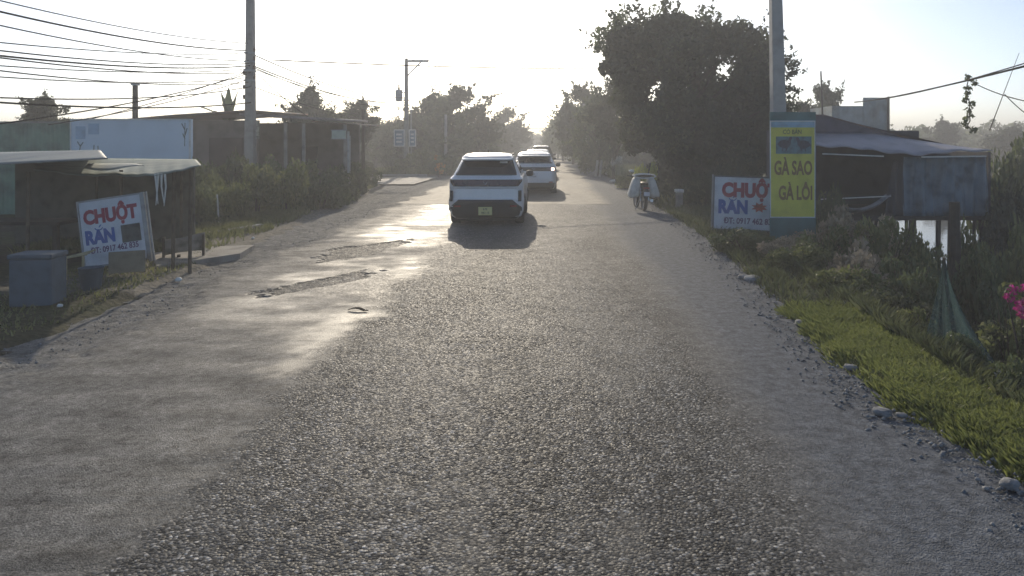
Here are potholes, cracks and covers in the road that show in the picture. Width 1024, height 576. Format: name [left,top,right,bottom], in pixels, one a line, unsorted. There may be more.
pothole [245,269,389,299]
pothole [310,238,415,263]
